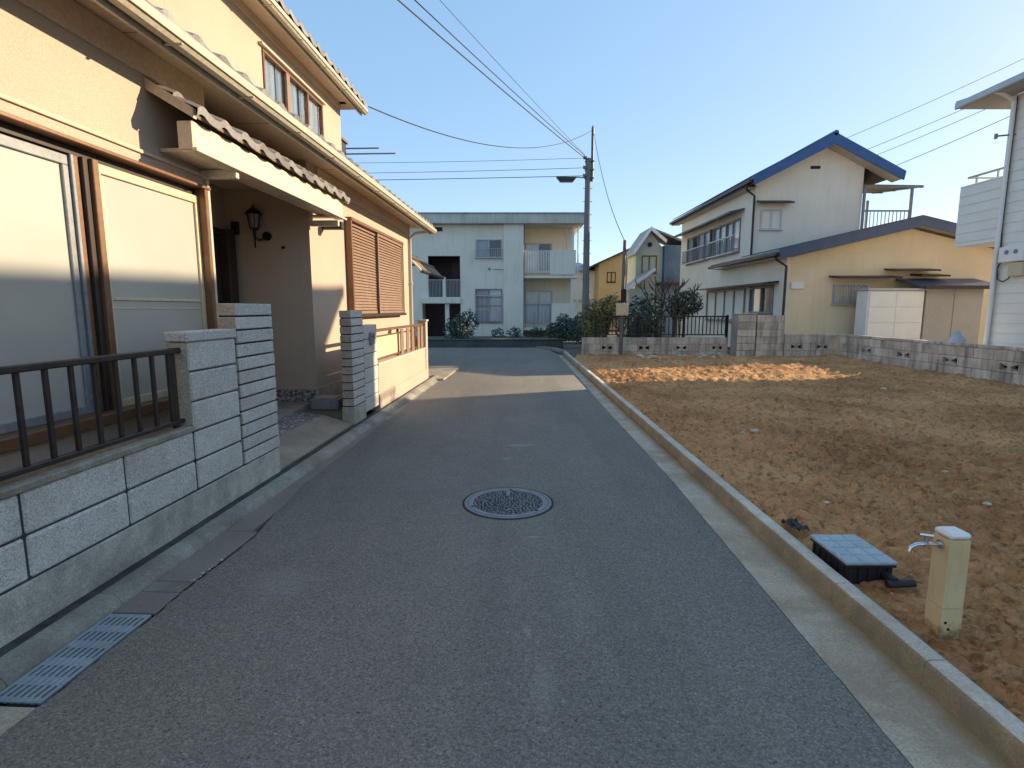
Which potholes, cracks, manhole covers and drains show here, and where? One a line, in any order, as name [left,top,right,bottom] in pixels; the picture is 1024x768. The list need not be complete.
drain grate [0,614,154,708]
manhole cover [462,487,554,520]
